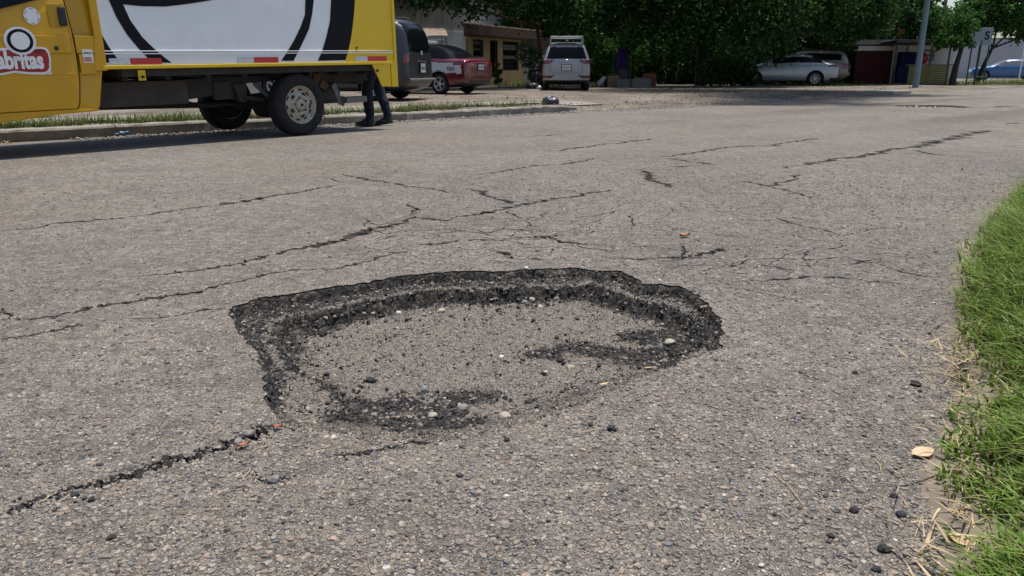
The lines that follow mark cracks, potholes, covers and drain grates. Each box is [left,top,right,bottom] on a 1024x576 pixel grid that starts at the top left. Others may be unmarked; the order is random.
crack [0,425,275,516]
pothole [228,268,725,441]
crack [0,106,1018,339]
